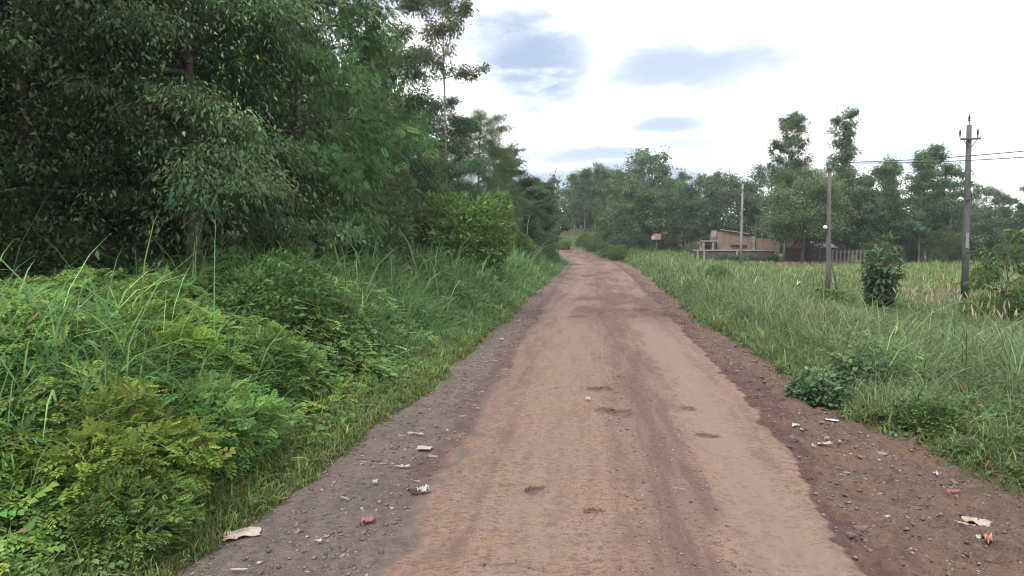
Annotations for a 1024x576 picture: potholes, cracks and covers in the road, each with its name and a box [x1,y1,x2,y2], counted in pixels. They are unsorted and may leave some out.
pothole [691,431,726,439]
pothole [519,484,549,498]
pothole [591,406,636,418]
pothole [578,506,608,516]
